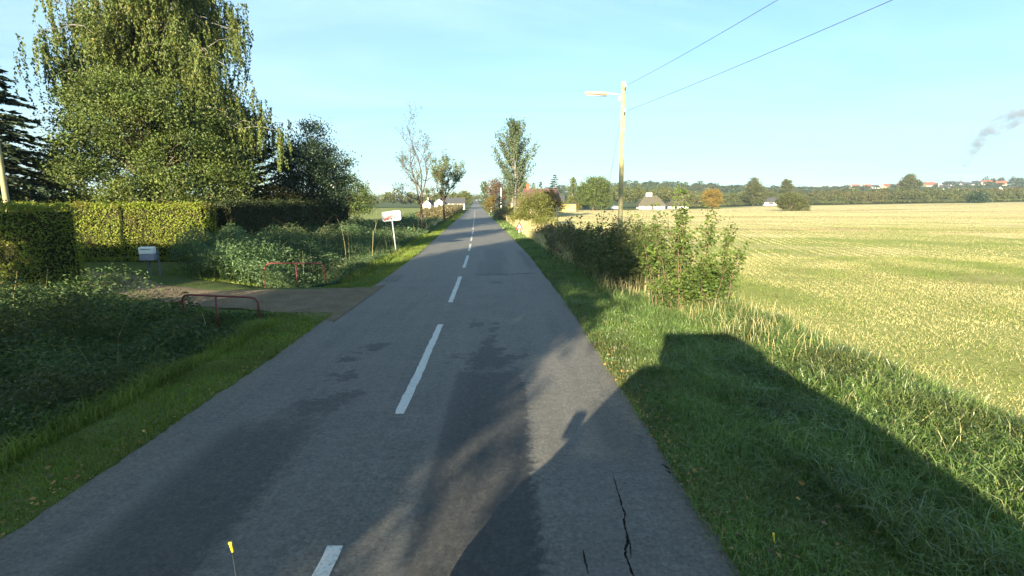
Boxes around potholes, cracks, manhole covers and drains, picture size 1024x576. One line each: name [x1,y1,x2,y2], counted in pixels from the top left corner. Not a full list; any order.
crack [612,471,634,576]
